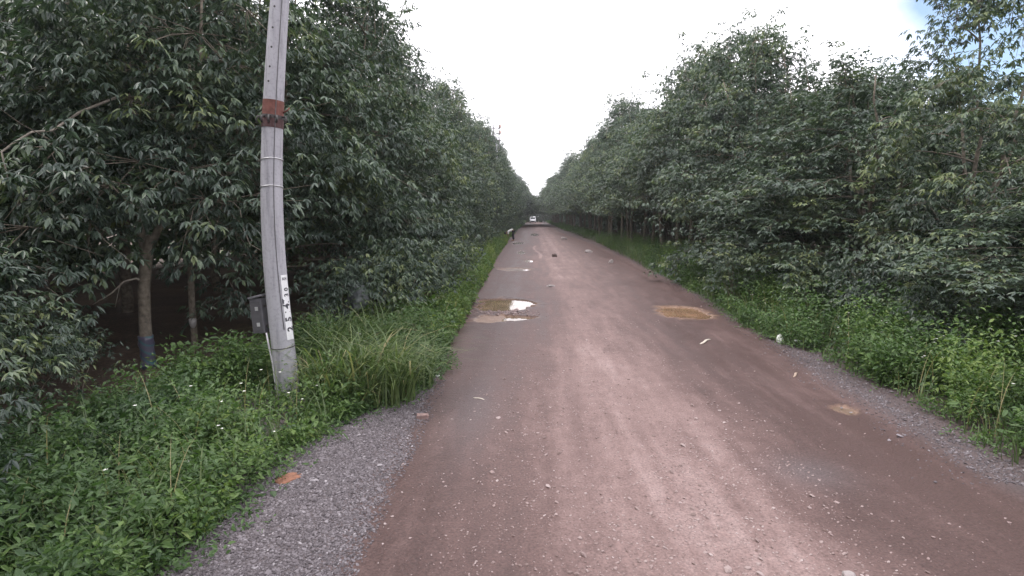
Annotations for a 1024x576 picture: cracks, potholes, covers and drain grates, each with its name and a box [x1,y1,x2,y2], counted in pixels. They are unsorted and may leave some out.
pothole [474,296,538,312]
pothole [465,313,538,323]
